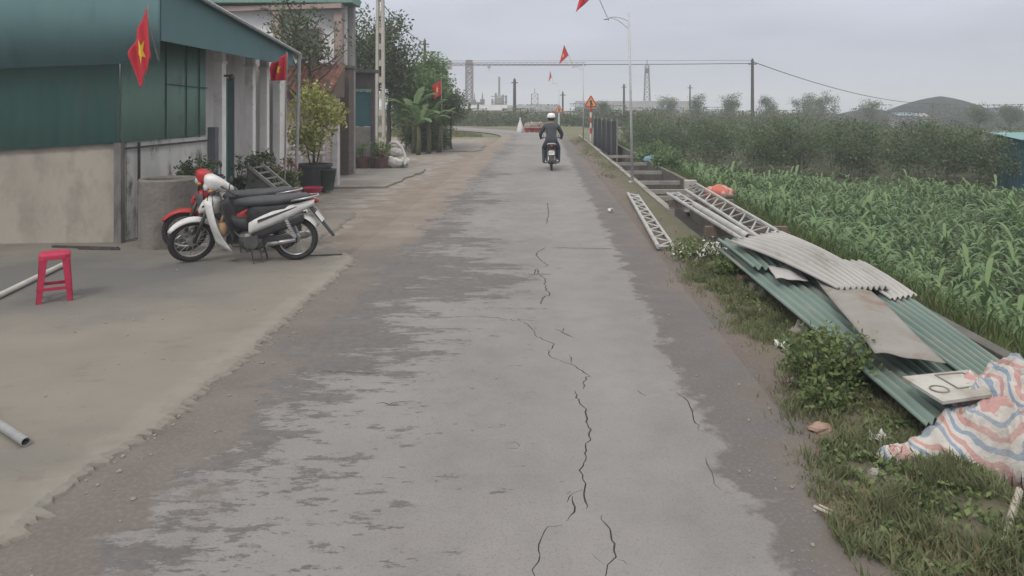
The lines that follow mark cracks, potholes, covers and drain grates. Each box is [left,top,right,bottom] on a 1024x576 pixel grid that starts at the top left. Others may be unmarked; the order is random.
crack [676,392,700,431]
crack [458,316,626,576]
crack [534,247,608,304]
